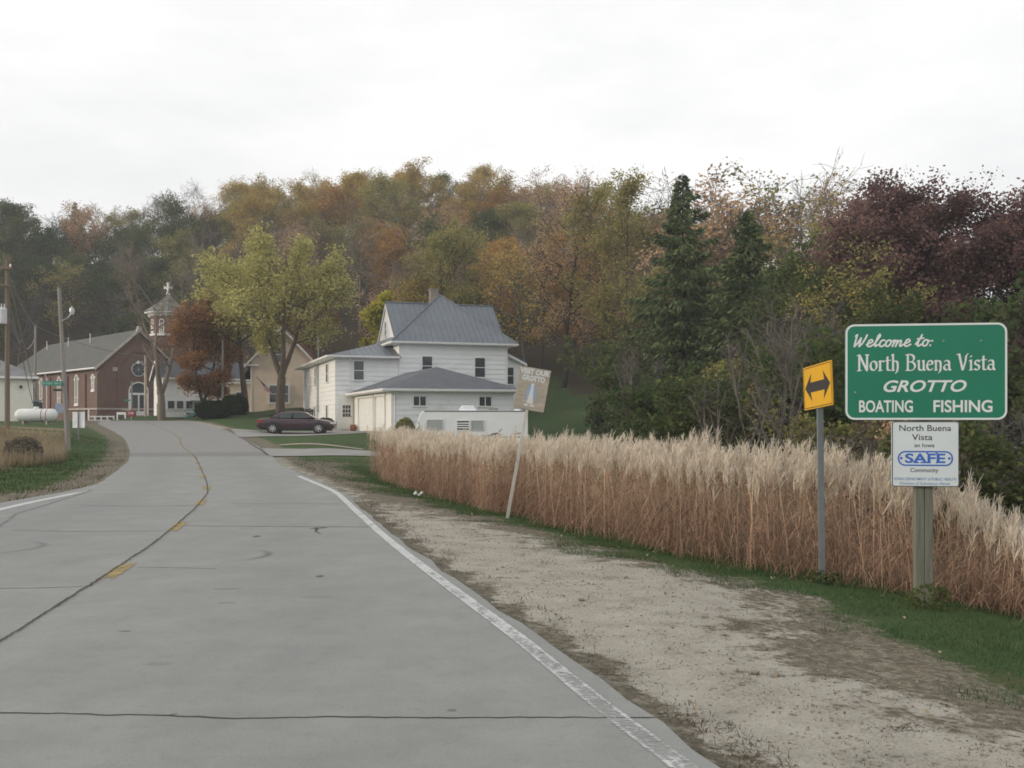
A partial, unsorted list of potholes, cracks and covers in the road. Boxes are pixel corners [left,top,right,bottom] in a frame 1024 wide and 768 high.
crack [0,489,101,531]
